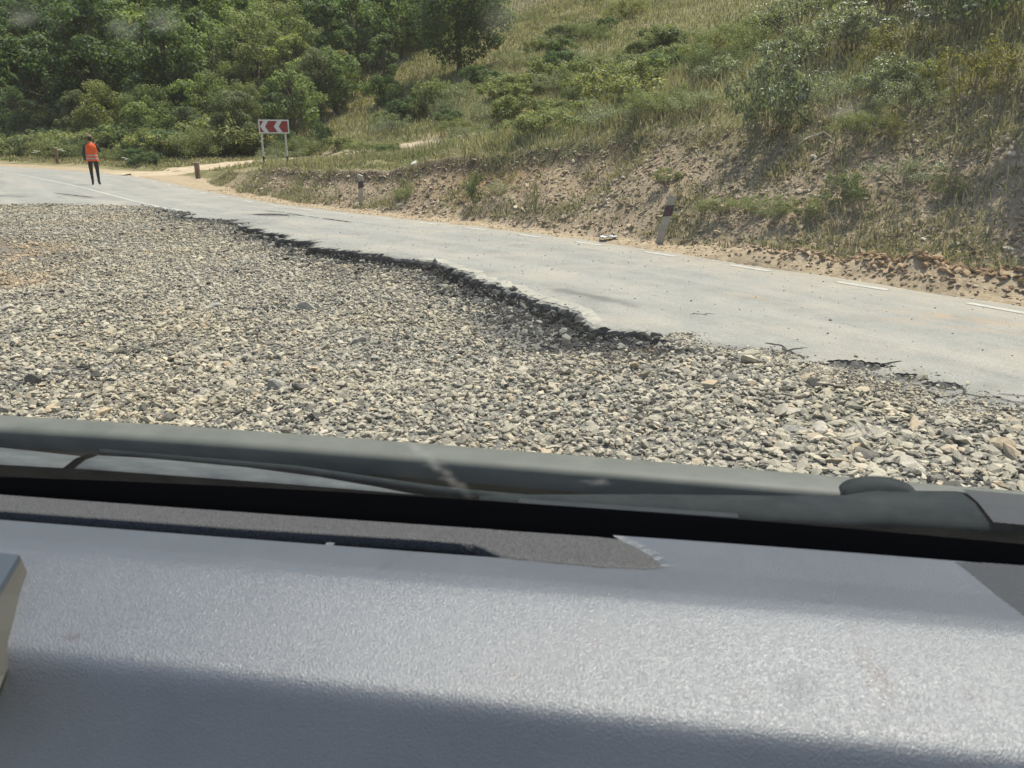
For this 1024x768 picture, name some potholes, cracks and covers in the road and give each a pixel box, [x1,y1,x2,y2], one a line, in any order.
pothole [827,360,905,375]
crack [769,343,834,368]
pothole [922,382,967,391]
